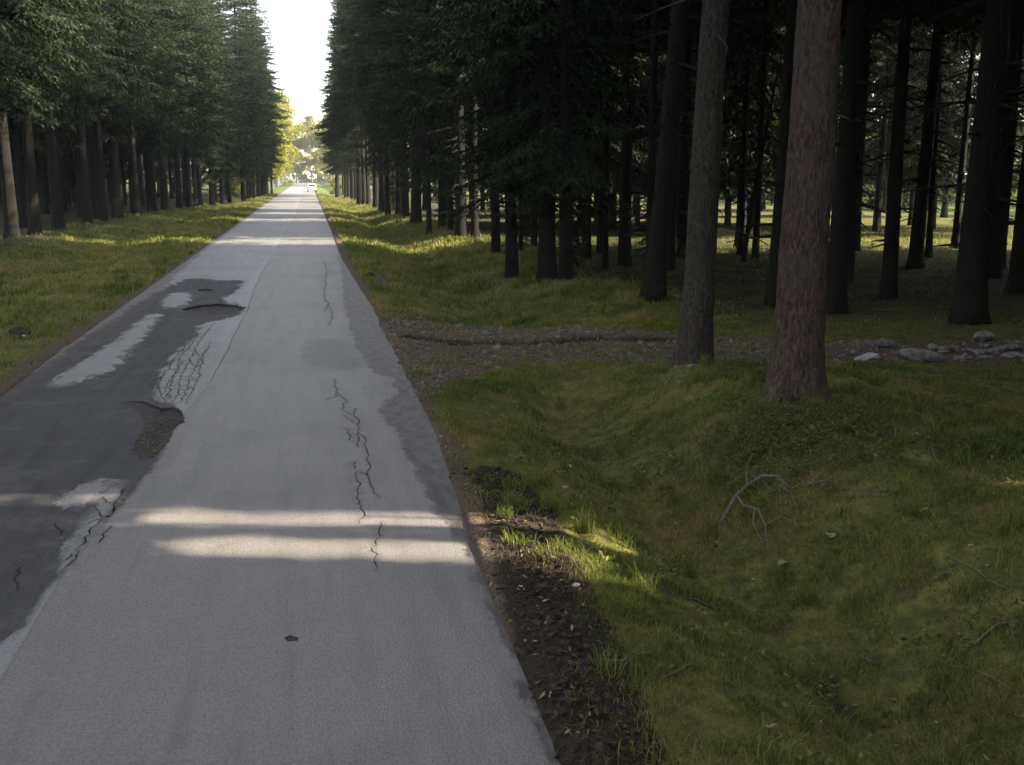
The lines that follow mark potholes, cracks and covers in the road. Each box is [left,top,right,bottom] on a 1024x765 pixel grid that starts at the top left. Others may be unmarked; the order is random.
pothole [121,401,185,461]
crack [149,273,262,404]
crack [328,379,382,569]
crack [13,565,23,591]
crack [54,489,124,568]
